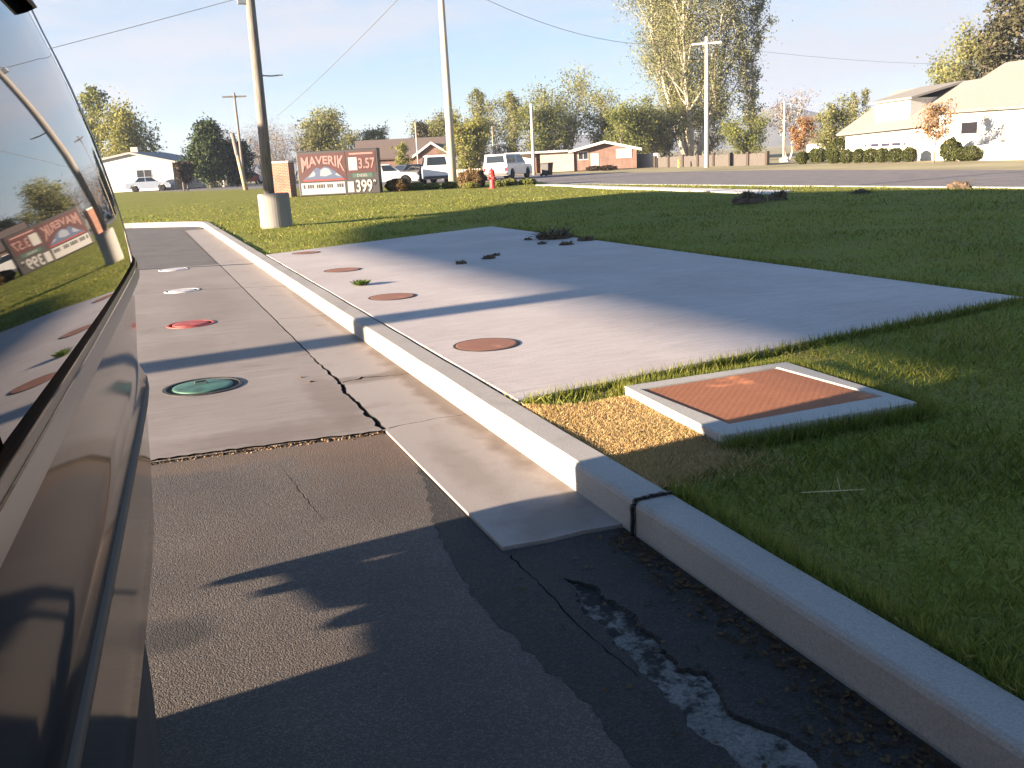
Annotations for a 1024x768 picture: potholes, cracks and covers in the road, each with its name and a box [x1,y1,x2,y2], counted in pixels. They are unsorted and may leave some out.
manhole cover [453,338,520,352]
manhole cover [162,377,244,397]
manhole cover [368,293,416,301]
crack [310,355,466,433]
manhole cover [166,320,215,329]
crack [510,555,638,677]
